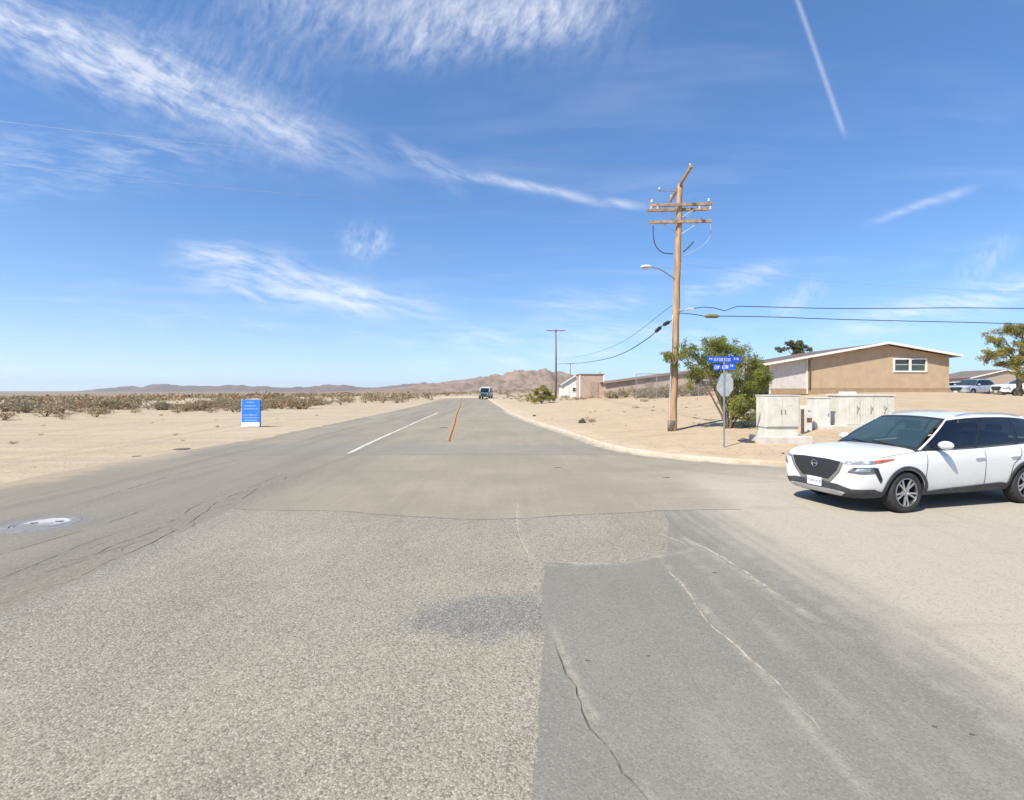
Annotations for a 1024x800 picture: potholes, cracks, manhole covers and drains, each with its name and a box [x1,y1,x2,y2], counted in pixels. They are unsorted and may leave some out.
crack [514,503,863,774]
crack [2,467,334,604]
manhole cover [0,516,83,533]
crack [544,638,648,800]
